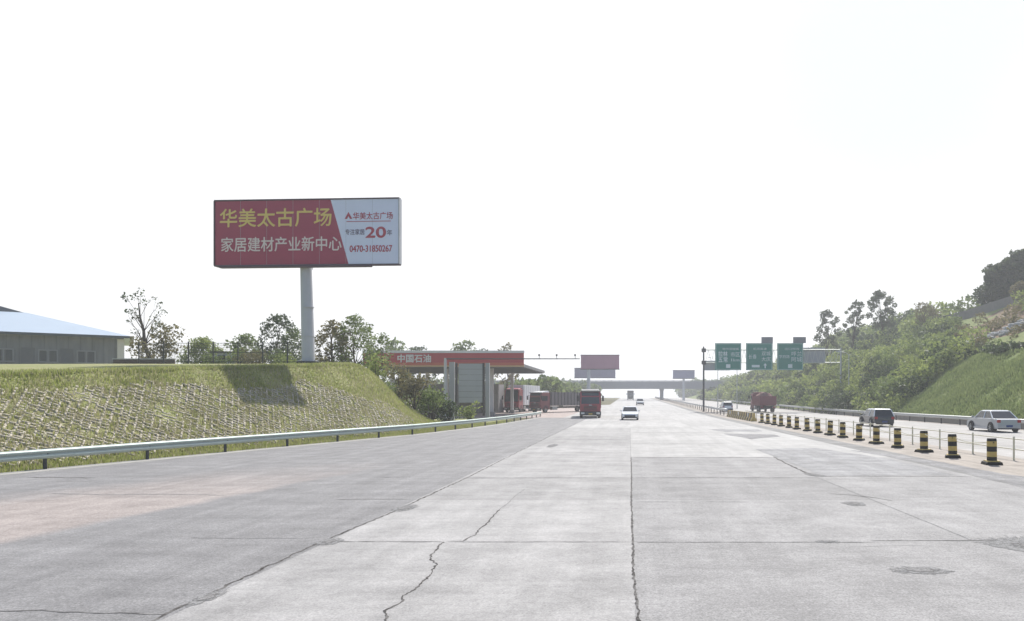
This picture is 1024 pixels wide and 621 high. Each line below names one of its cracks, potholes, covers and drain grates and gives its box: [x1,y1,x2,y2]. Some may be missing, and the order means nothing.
crack [463,489,525,541]
crack [383,542,444,621]
crack [630,459,641,621]
